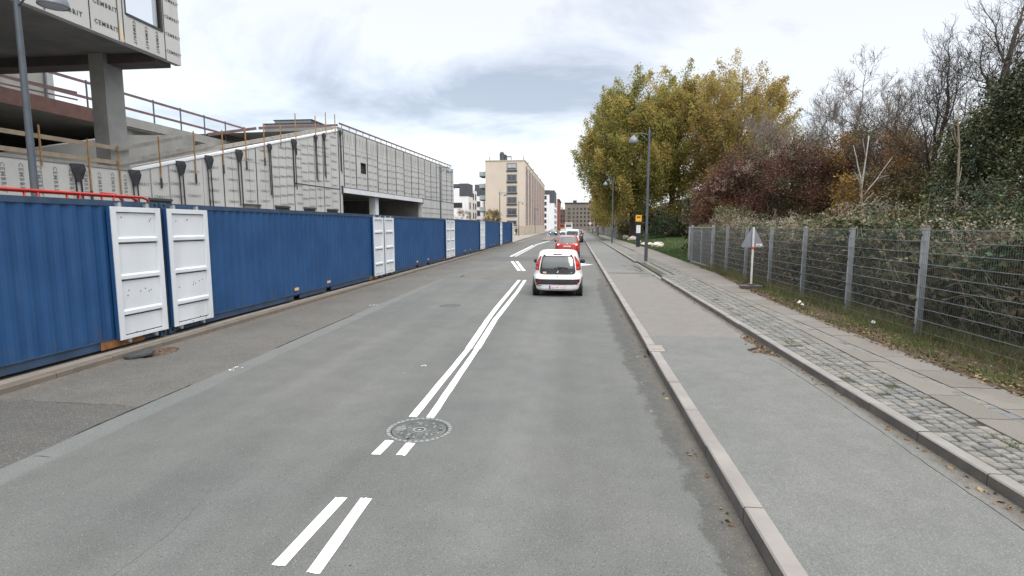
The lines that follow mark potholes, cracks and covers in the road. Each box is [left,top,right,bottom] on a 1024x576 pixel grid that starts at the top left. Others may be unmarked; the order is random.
crack [115,505,199,575]
manhole cover [385,418,453,443]
